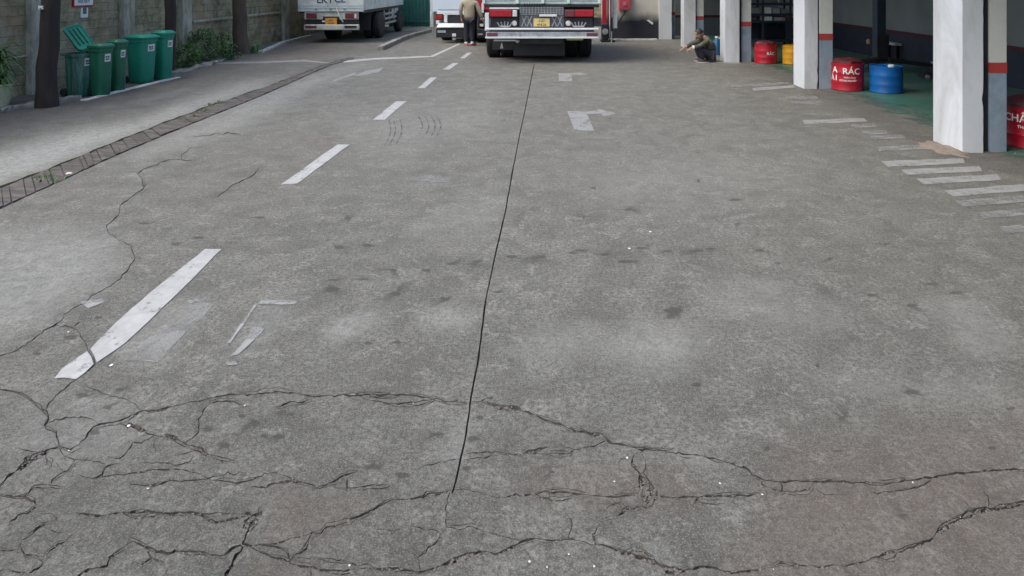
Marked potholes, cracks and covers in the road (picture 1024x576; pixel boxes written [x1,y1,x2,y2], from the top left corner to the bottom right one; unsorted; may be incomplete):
crack [0,152,1024,576]
